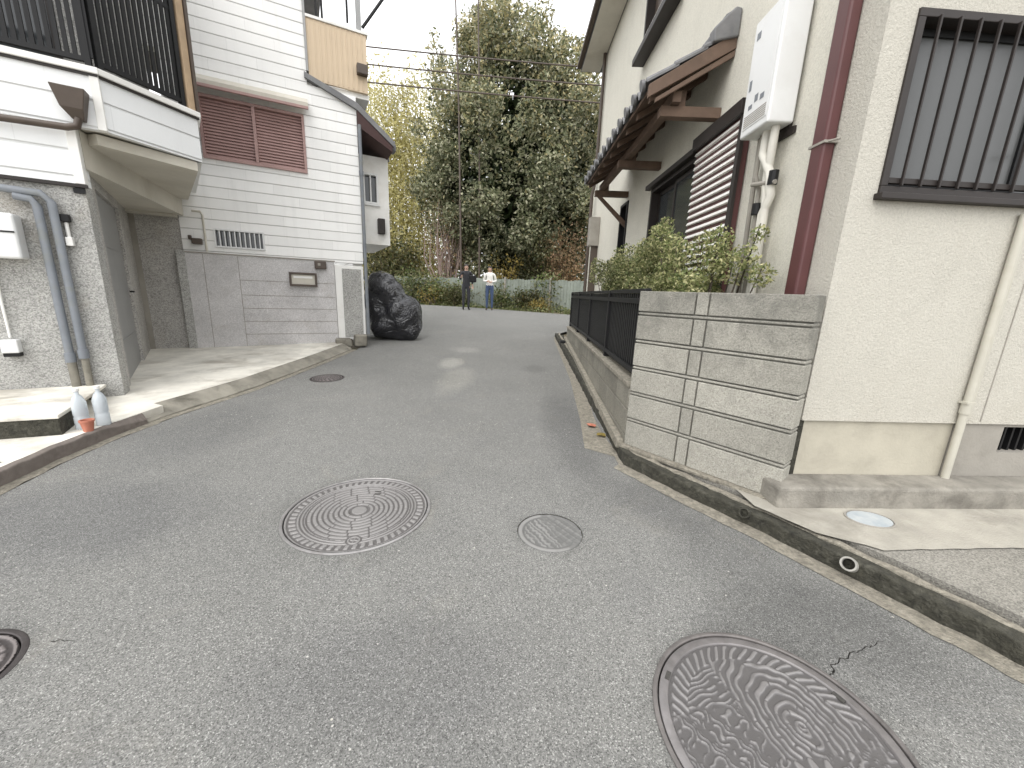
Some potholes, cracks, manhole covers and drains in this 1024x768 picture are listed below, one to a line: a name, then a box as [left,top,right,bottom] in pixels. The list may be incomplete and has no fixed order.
crack [829,640,886,675]
manhole cover [518,514,582,553]
manhole cover [652,632,922,768]
manhole cover [0,629,30,679]
manhole cover [309,374,345,382]
manhole cover [278,477,431,556]
utility cover [843,510,896,529]
